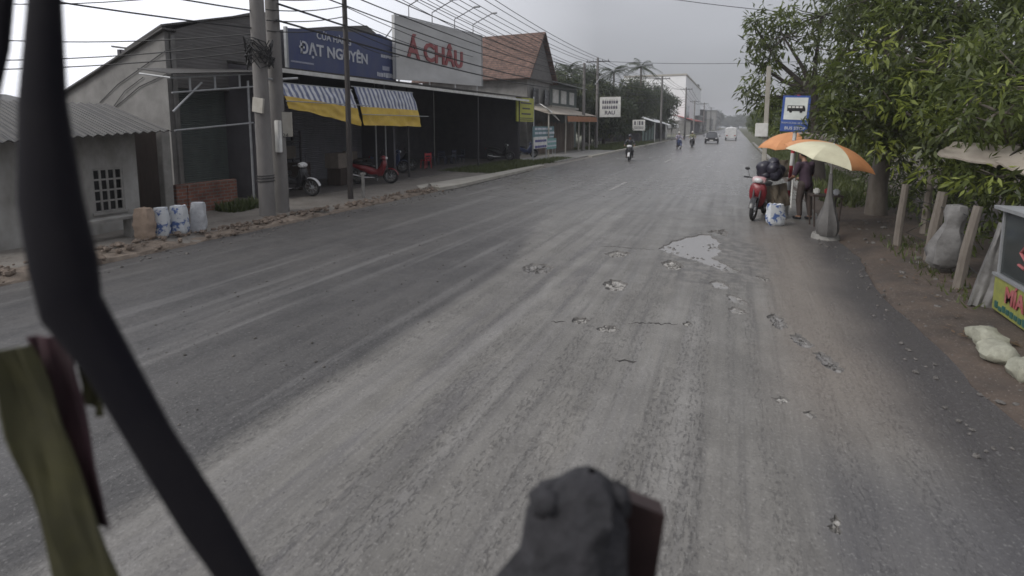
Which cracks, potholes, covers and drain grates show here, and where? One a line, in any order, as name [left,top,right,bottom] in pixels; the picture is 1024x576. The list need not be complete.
pothole [767,314,788,330]
pothole [603,279,628,291]
pothole [790,333,814,348]
pothole [659,234,741,272]
pothole [522,263,555,274]
pothole [827,514,841,535]
pothole [813,352,844,373]
